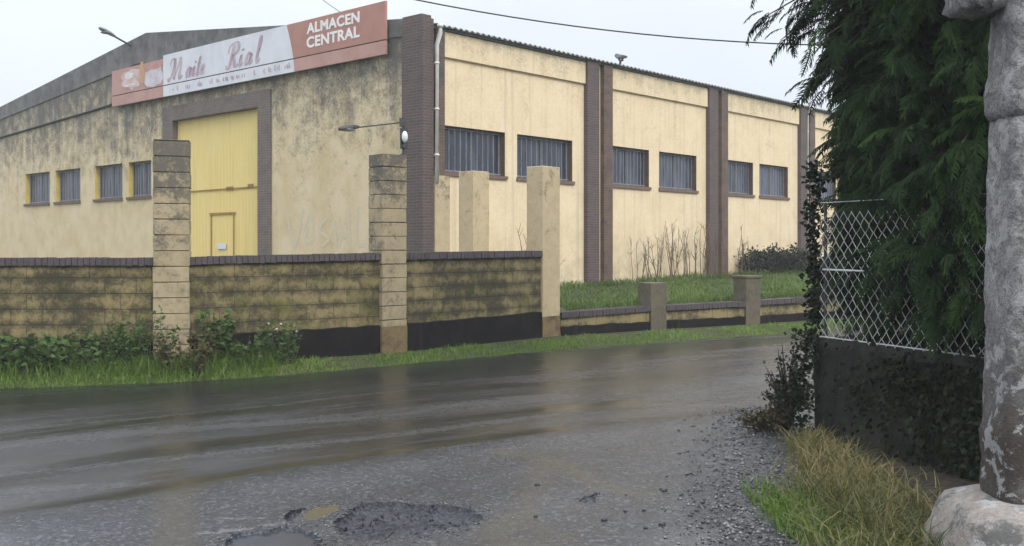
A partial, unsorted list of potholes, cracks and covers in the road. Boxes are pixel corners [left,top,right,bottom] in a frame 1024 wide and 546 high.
pothole [303,505,340,520]
pothole [580,492,600,504]
pothole [224,525,323,546]
pothole [332,501,484,543]
